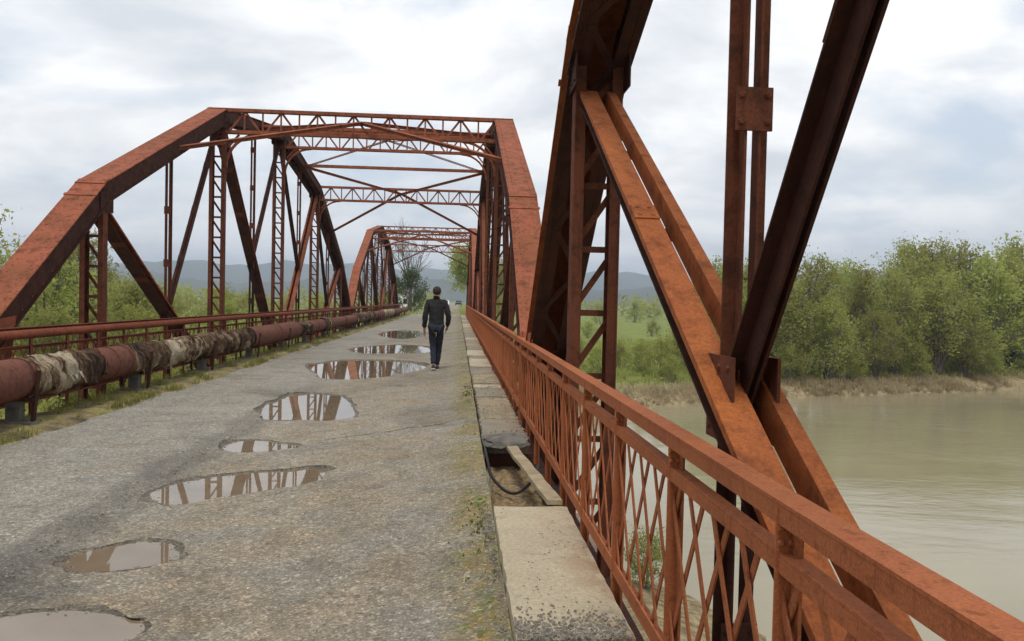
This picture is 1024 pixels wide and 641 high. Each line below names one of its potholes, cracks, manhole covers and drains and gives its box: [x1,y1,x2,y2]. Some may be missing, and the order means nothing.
crack [315,418,464,441]
pothole [377,330,426,339]
pothole [305,359,430,380]
pothole [218,439,302,453]
pothole [51,537,189,574]
pothole [347,344,430,354]
pothole [138,465,336,506]
pothole [253,392,359,421]
pothole [0,603,152,641]
